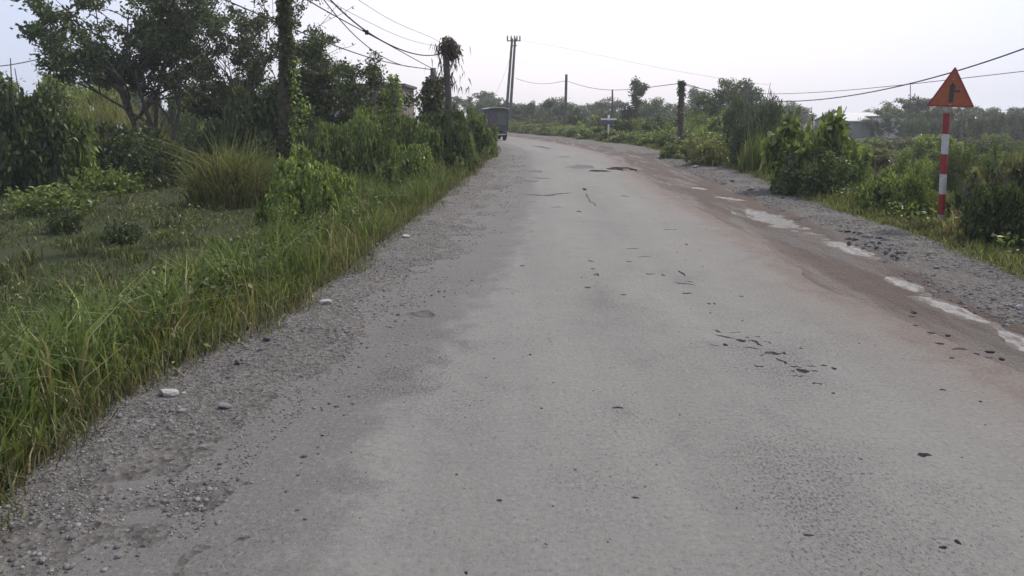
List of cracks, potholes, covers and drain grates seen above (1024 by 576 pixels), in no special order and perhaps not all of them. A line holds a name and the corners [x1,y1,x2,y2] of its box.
pothole [406,310,436,318]
